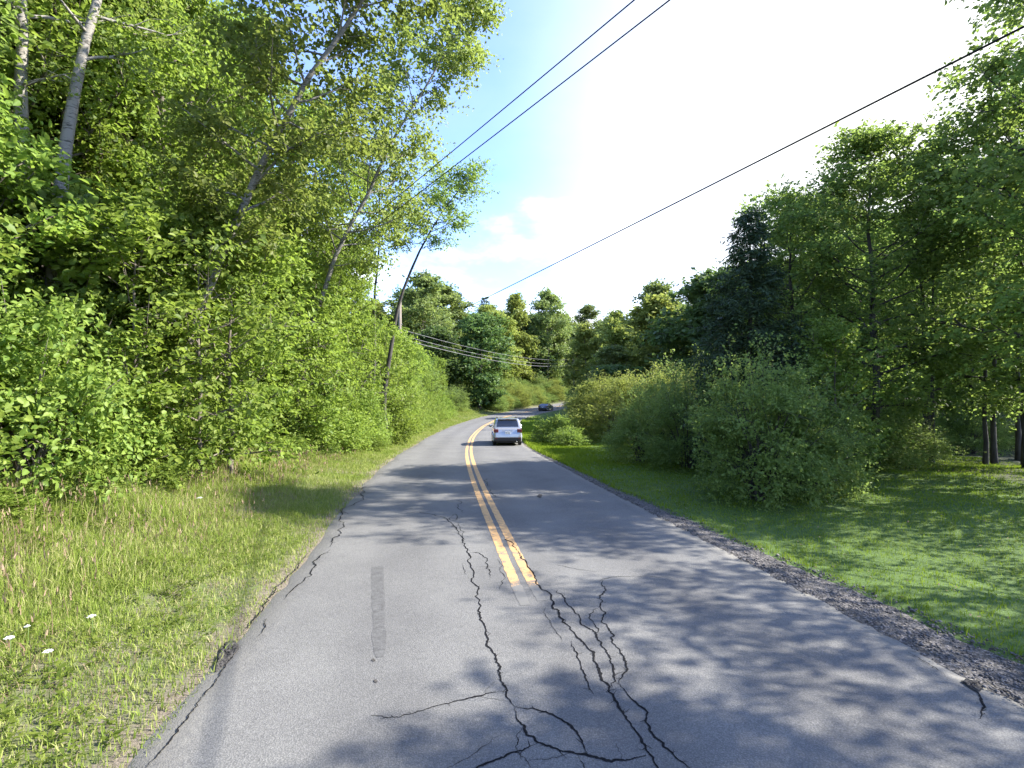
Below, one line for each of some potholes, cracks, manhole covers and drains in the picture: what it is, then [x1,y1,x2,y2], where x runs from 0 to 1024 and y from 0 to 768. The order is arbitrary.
crack [246,485,369,635]
crack [371,501,690,768]
crack [148,648,239,765]
crack [974,678,1024,718]
